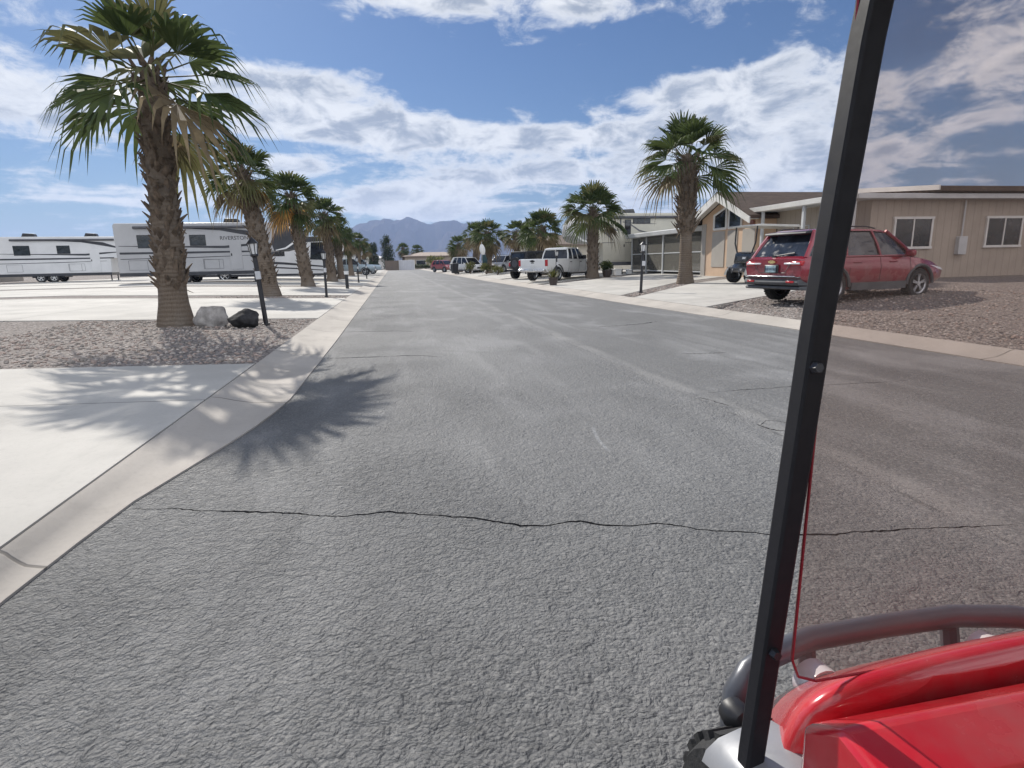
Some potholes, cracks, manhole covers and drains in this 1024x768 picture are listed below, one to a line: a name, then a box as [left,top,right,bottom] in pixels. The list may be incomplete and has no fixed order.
crack [134,508,1018,536]
